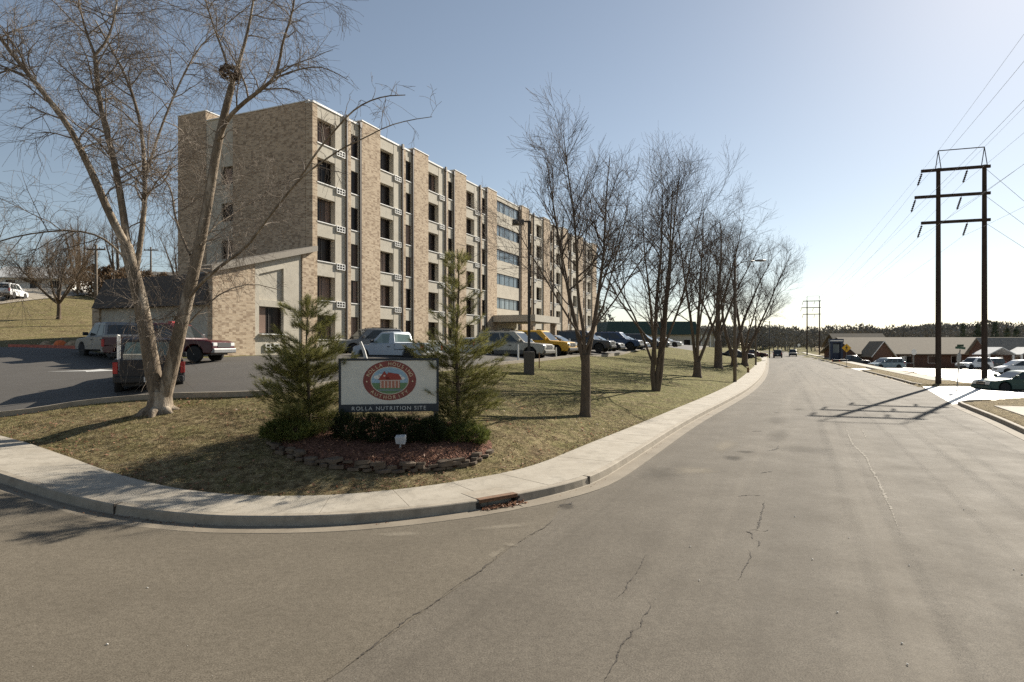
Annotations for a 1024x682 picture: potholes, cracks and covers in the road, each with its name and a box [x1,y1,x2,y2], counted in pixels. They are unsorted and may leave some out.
crack [604,558,652,679]
crack [739,495,767,578]
drain grate [461,487,520,510]
